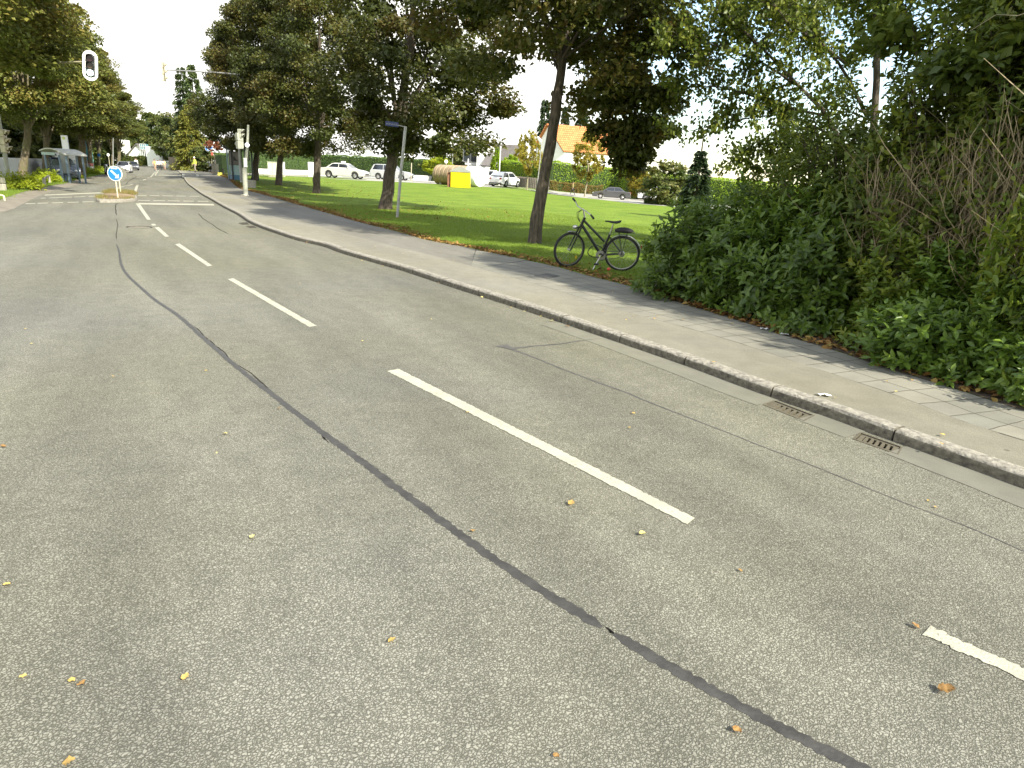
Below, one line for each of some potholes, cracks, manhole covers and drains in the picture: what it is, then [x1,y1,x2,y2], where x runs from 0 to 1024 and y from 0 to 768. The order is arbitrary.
drain grate [763,400,815,421]
drain grate [853,432,902,454]
